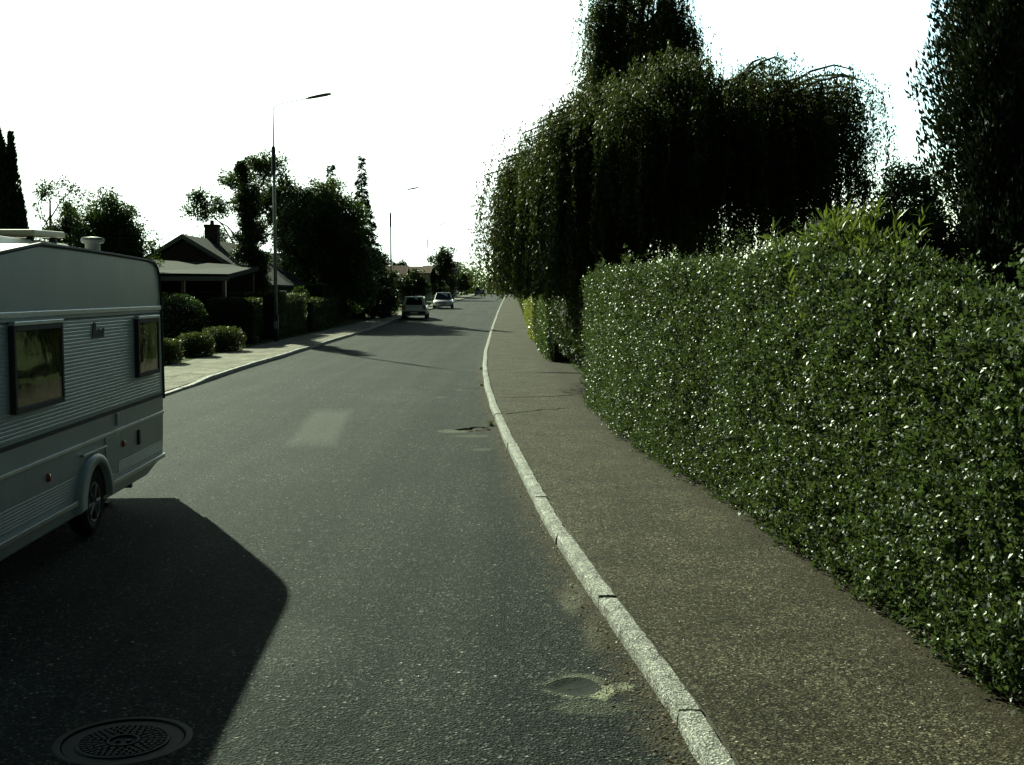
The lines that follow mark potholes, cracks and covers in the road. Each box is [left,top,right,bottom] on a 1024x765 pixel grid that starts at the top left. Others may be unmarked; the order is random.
pothole [544,677,601,696]
manhole cover [51,717,193,765]
